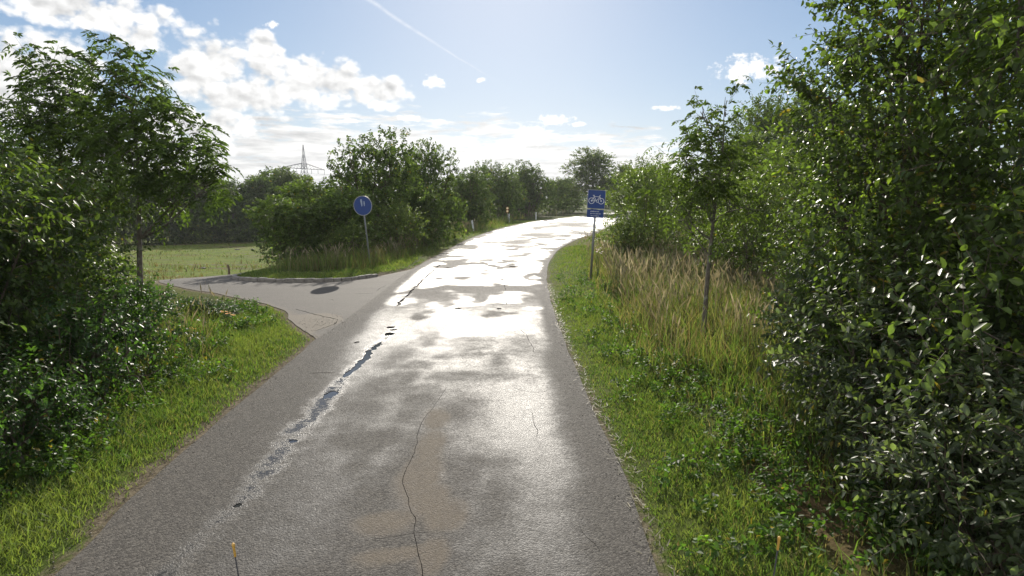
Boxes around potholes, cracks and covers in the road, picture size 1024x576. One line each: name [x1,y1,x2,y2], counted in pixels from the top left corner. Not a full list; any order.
crack [372,390,445,576]
